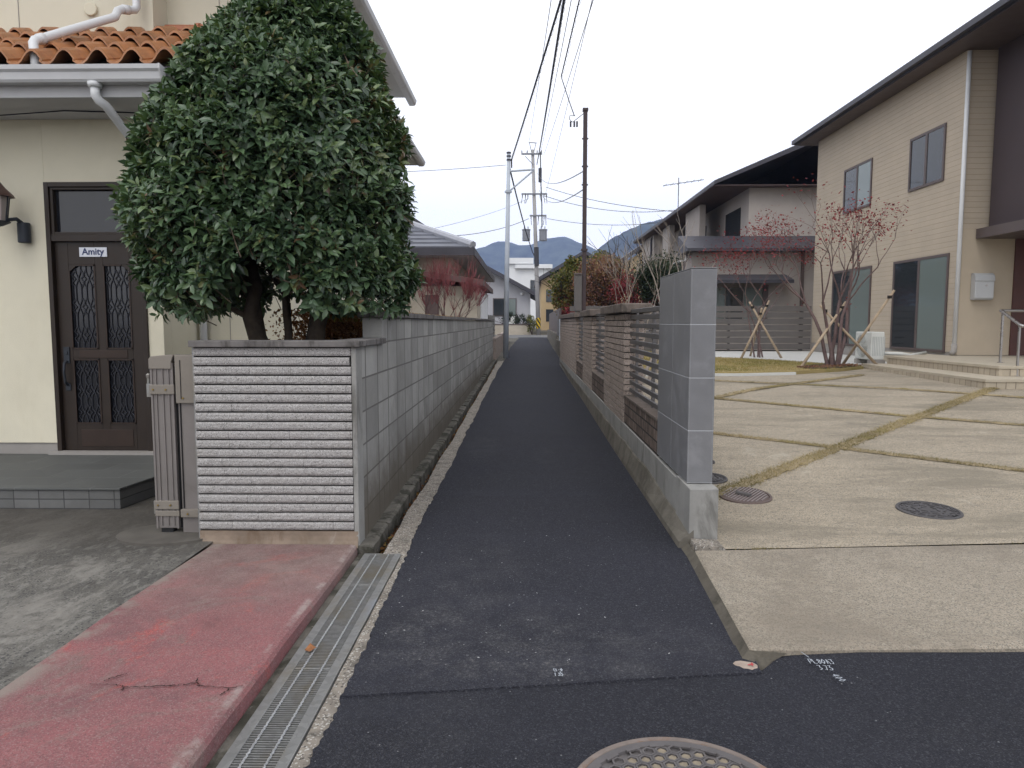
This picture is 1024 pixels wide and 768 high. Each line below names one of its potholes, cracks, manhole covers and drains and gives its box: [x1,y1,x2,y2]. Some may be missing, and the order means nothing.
crack [104,673,242,695]
manhole cover [719,487,773,504]
manhole cover [578,737,766,768]
drain grate [216,553,401,768]
manhole cover [895,501,964,520]
manhole cover [712,473,728,484]
